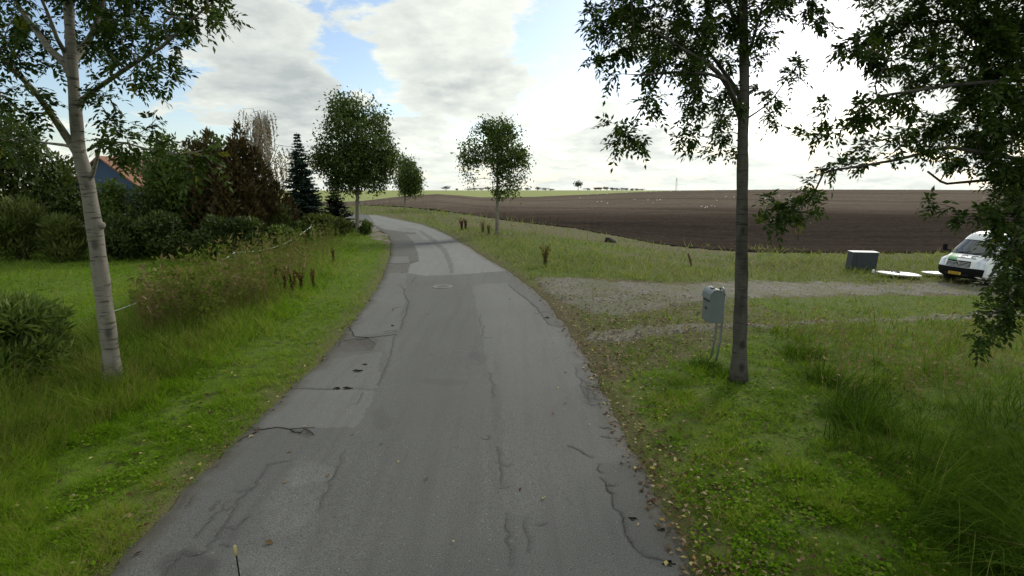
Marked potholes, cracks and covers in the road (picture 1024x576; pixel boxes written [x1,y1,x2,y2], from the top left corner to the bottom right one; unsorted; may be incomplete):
crack [342,261,414,340]
crack [569,446,664,561]
crack [485,438,543,563]
crack [226,426,314,446]
